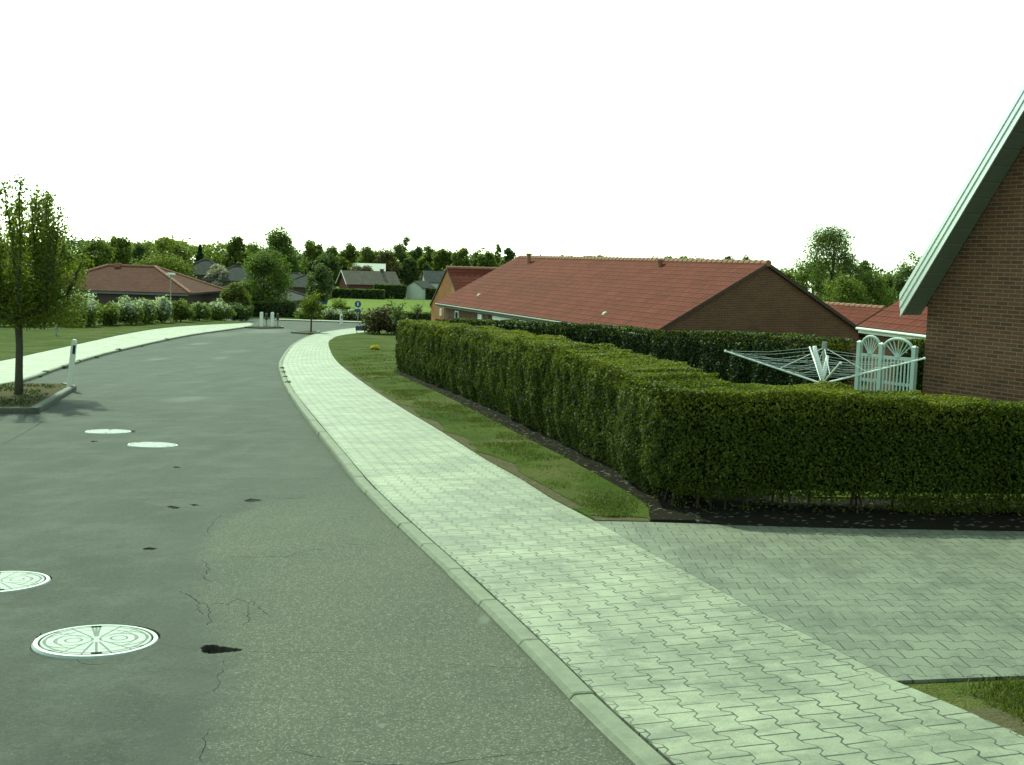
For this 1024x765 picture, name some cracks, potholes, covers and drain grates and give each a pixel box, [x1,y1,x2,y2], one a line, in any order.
manhole cover [31,625,159,659]
manhole cover [0,571,51,593]
pothole [201,645,242,654]
crack [179,563,267,626]
